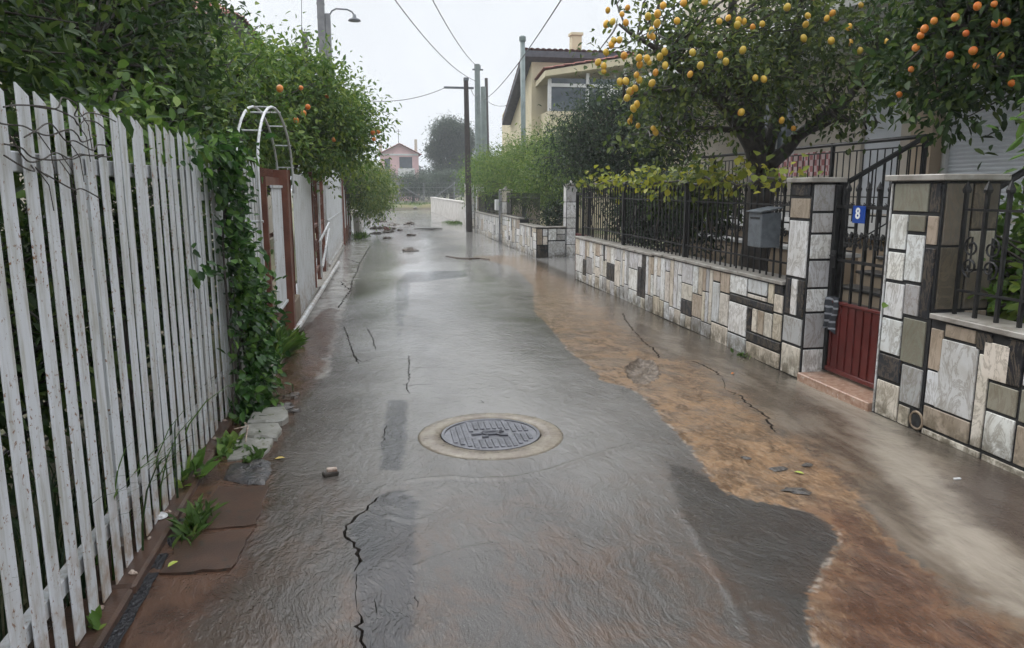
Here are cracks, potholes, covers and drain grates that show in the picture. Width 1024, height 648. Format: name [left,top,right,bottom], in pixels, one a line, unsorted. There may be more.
crack [343,327,376,364]
crack [622,313,660,358]
crack [343,497,378,648]
pothole [624,358,661,384]
crack [692,361,777,433]
manhole cover [418,413,563,460]
